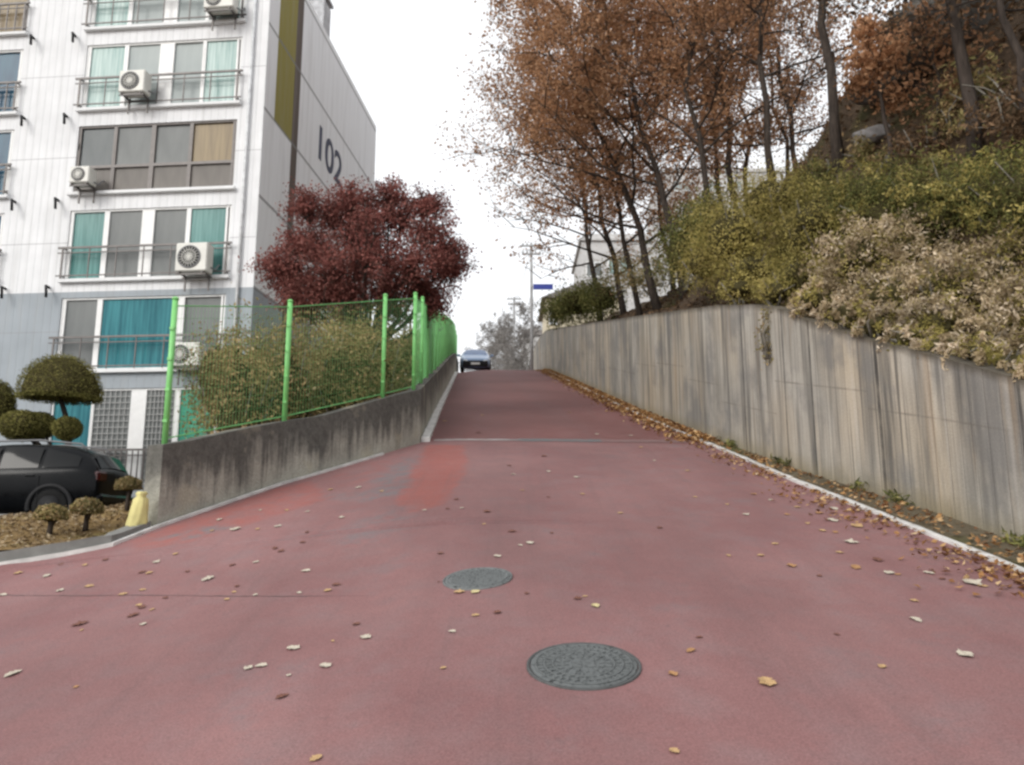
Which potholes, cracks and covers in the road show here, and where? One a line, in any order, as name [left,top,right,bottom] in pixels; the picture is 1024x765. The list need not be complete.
manhole cover [443,567,513,590]
manhole cover [526,642,642,691]
